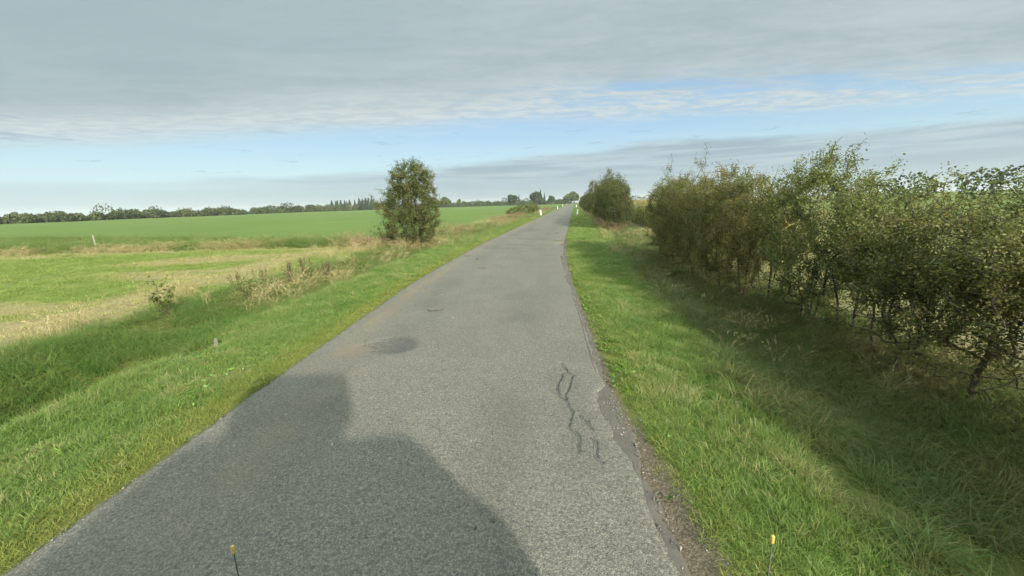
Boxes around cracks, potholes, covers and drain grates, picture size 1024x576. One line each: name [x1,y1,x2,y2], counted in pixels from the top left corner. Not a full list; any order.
crack [501,233,603,462]
